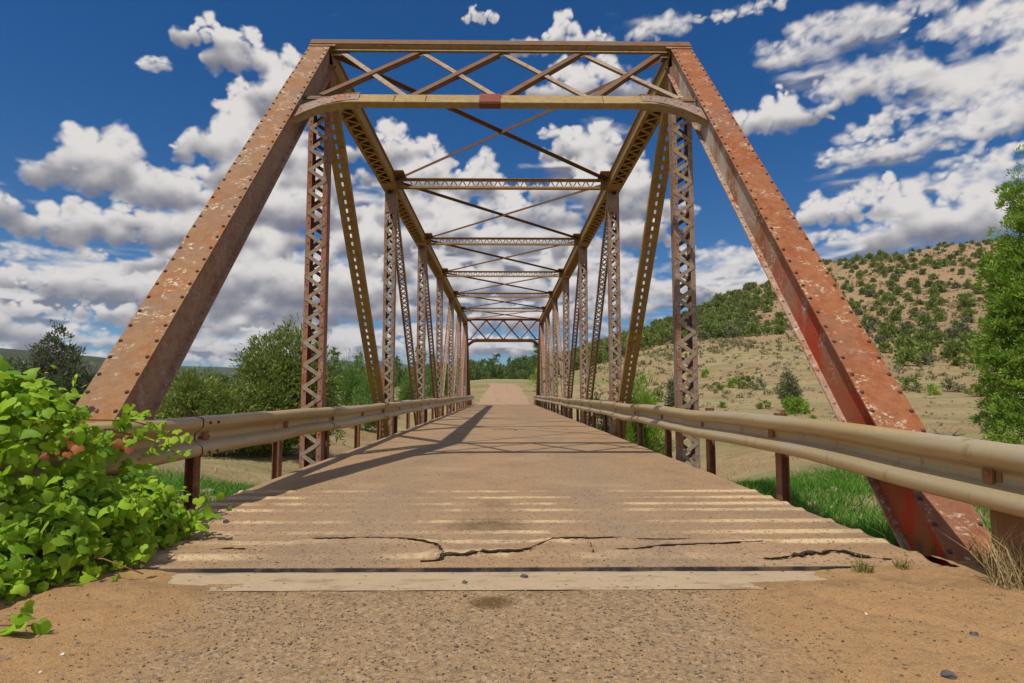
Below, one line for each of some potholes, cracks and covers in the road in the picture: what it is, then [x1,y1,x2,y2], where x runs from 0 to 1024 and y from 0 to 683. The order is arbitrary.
crack [314,536,892,562]
